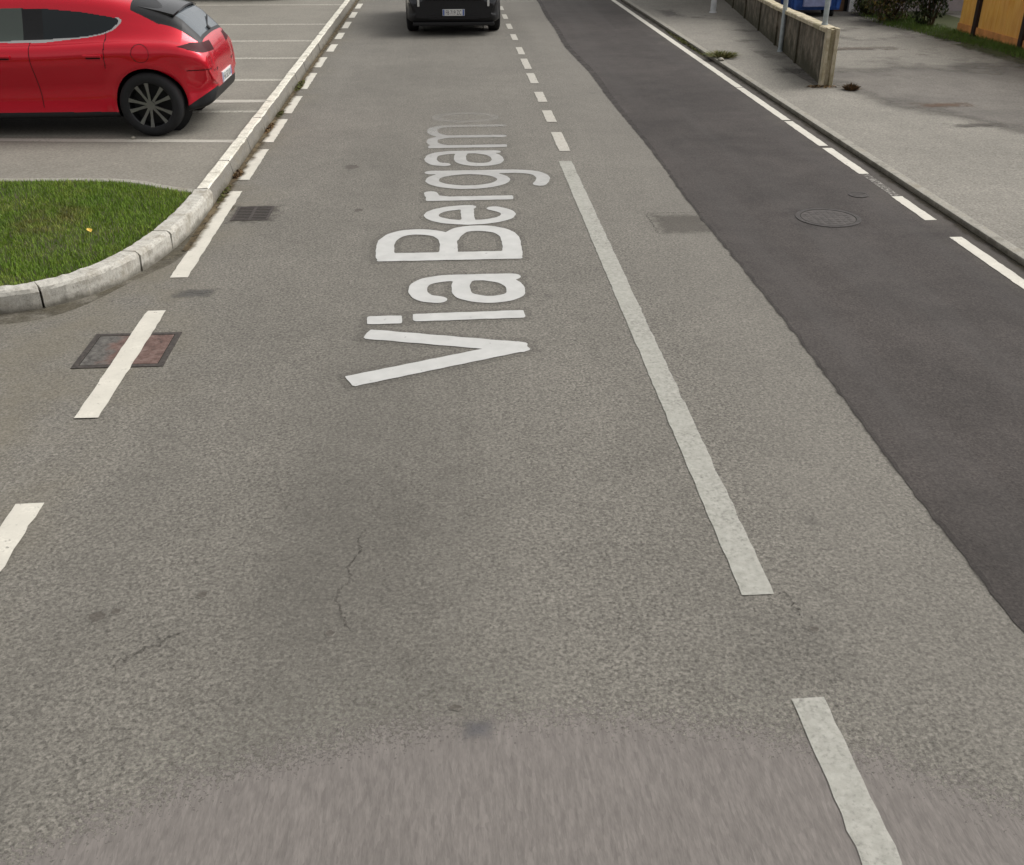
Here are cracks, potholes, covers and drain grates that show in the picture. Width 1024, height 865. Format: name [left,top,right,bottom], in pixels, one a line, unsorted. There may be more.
manhole cover [70,332,182,369]
manhole cover [795,208,862,227]
drain grate [230,206,275,221]
